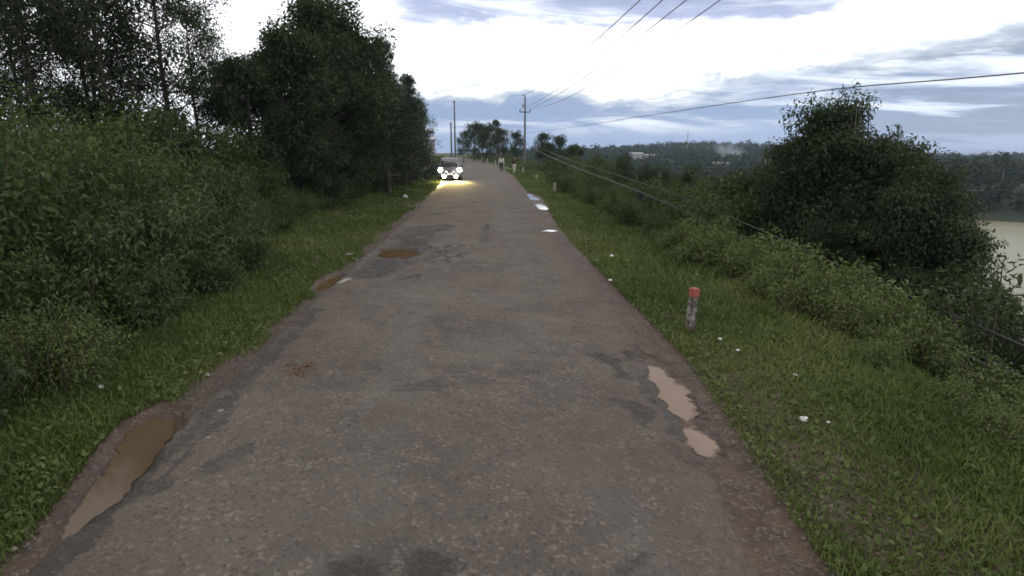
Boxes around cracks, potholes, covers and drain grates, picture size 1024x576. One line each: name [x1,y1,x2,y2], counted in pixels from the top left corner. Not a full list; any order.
pothole [309,272,346,293]
pothole [525,193,550,210]
crack [398,243,473,280]
pothole [32,402,191,549]
pothole [620,343,733,464]
